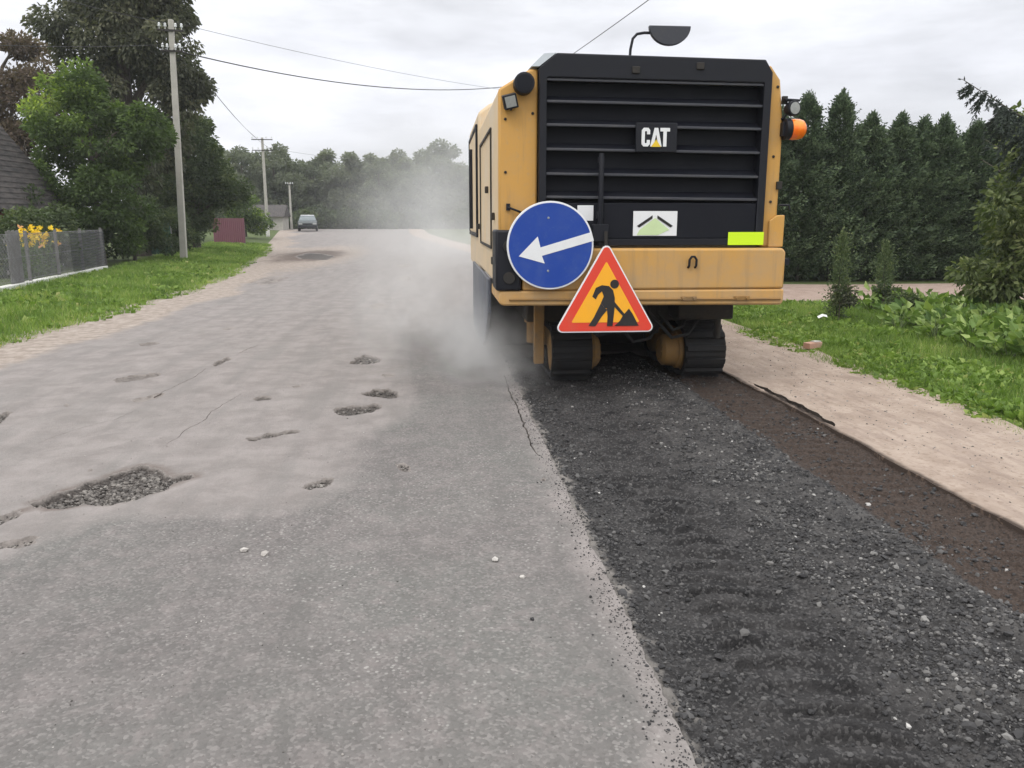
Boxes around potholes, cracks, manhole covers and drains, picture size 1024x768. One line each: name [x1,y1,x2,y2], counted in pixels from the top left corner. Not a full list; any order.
pothole [246,430,300,441]
pothole [349,355,382,365]
pothole [29,465,195,509]
pothole [361,388,400,399]
pothole [333,403,383,416]
pothole [114,372,162,383]
pothole [0,536,40,549]
pothole [302,477,335,491]
crack [504,376,539,456]
pothole [0,510,24,525]
